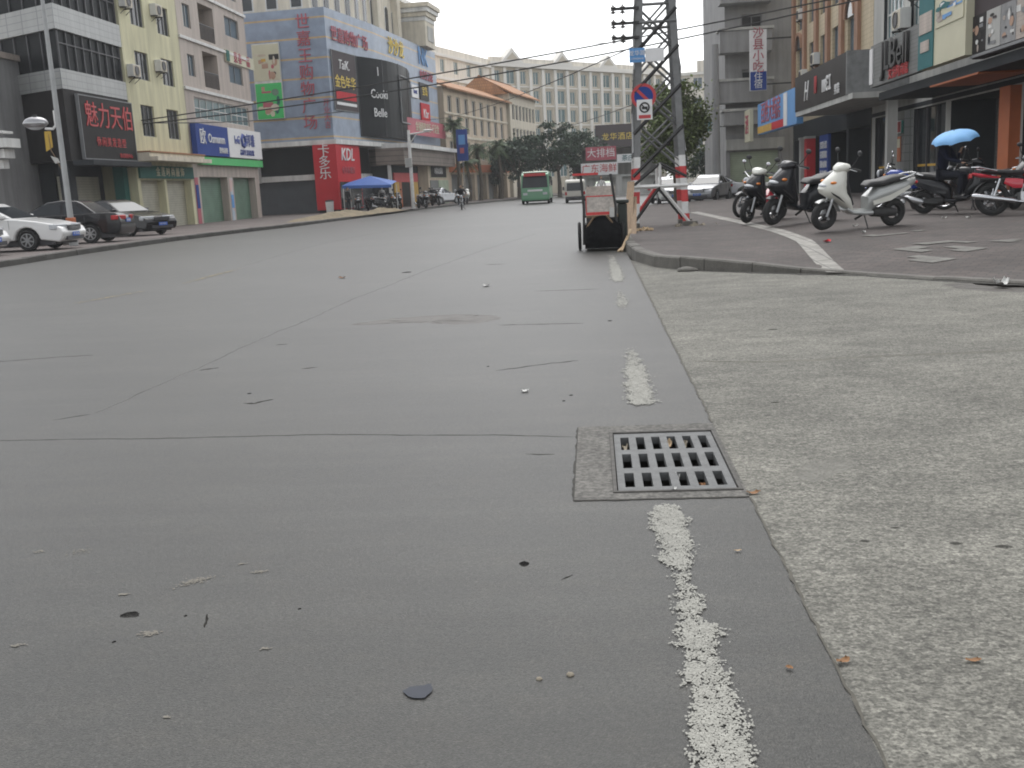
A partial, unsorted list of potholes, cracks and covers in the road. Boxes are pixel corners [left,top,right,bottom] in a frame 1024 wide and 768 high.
drain grate [572,423,750,501]
